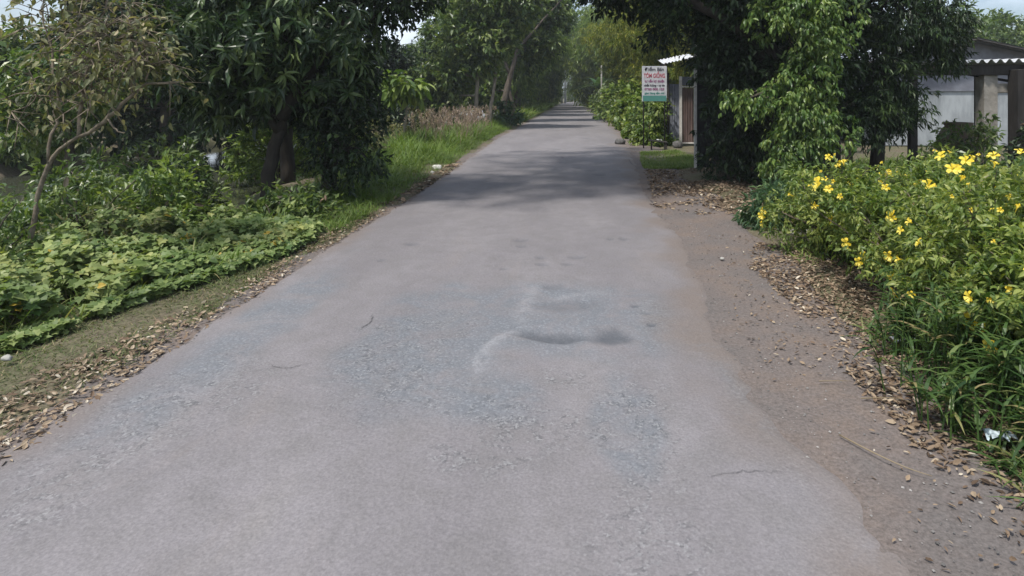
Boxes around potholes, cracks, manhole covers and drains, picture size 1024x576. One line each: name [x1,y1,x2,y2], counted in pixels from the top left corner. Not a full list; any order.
pothole [502,325,582,345]
pothole [575,323,643,347]
